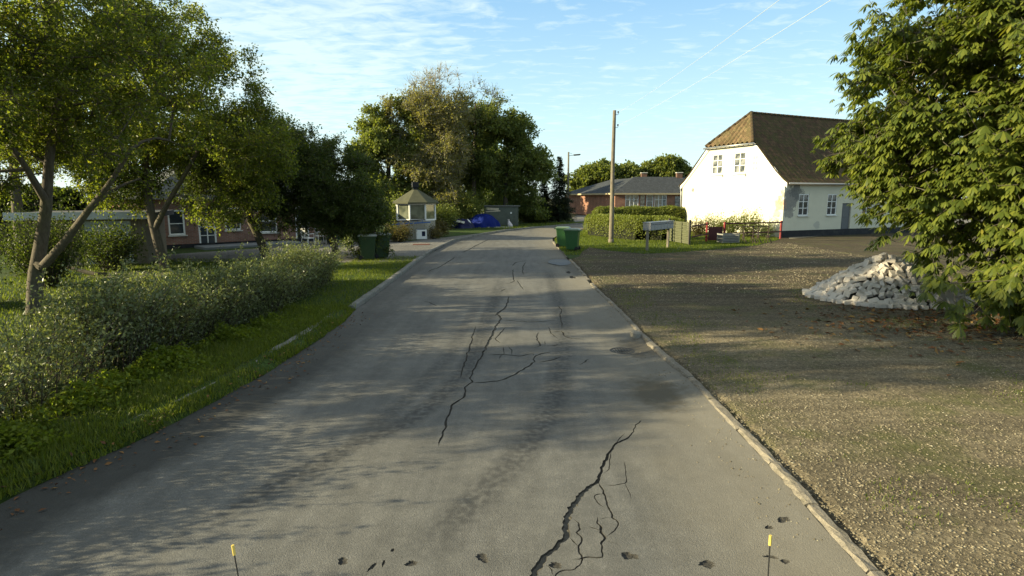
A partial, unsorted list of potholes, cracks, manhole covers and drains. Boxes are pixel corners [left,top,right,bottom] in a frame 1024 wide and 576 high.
crack [530,421,641,576]
crack [425,261,575,444]
